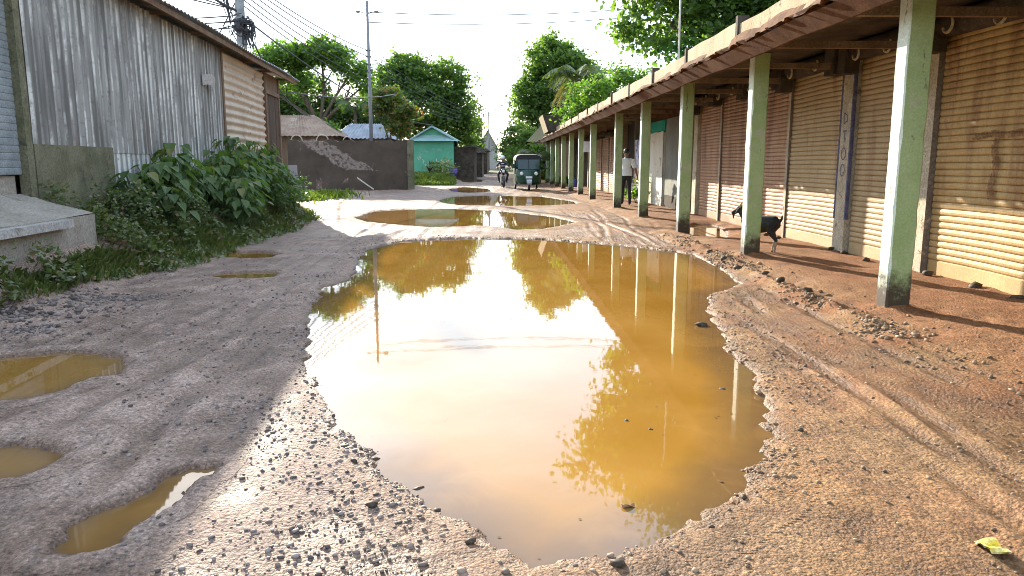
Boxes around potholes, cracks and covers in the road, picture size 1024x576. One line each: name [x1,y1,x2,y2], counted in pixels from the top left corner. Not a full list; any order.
pothole [426,194,589,206]
pothole [339,207,595,231]
pothole [186,268,296,281]
pothole [0,426,111,489]
pothole [207,249,292,261]
pothole [0,342,162,410]
pothole [262,235,838,576]
pothole [4,452,248,575]
